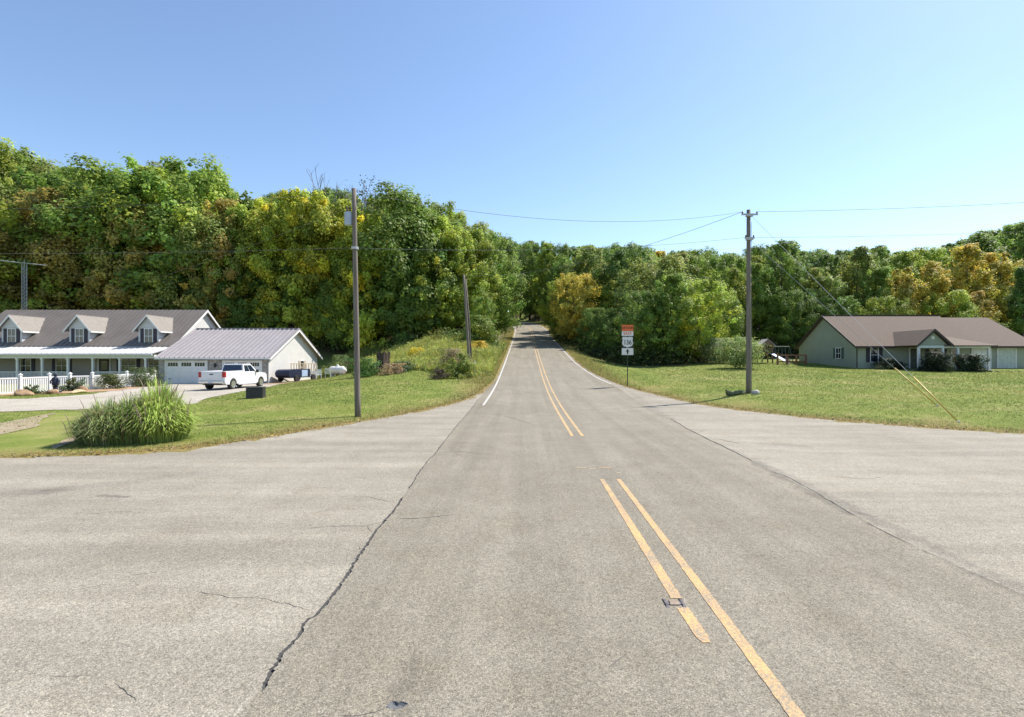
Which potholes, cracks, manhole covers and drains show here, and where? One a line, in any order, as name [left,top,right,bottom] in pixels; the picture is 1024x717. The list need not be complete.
pothole [386,701,408,710]
crack [197,400,479,717]
